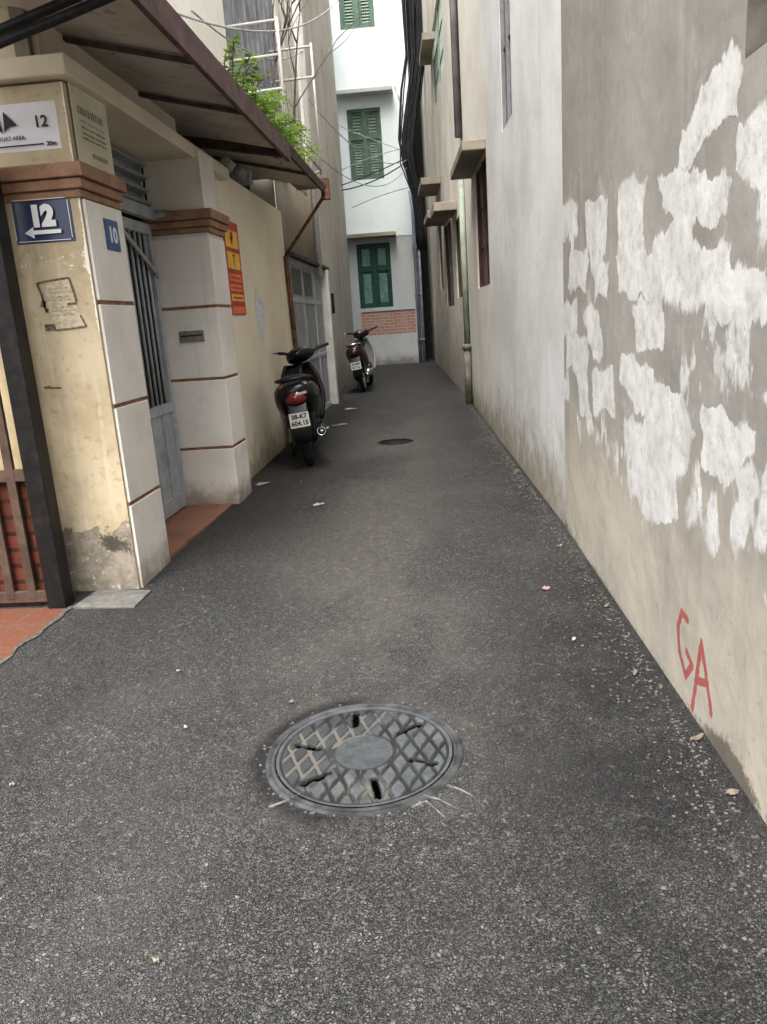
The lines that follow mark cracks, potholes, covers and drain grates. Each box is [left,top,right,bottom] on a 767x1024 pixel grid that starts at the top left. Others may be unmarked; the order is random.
manhole cover [259,699,476,818]
